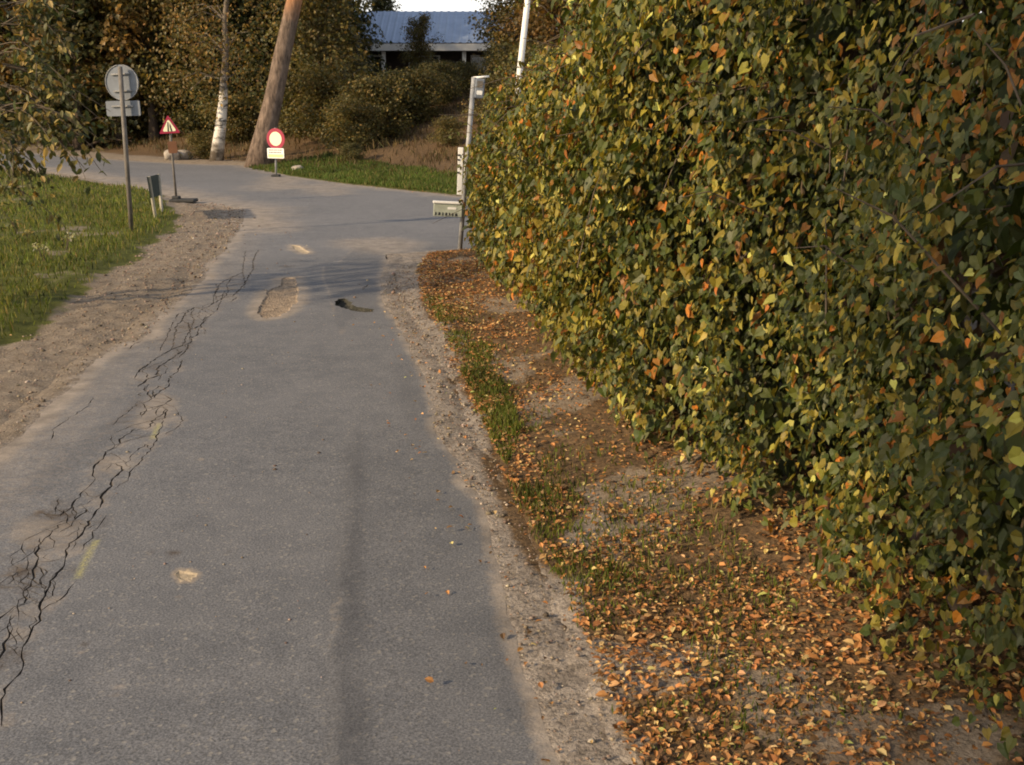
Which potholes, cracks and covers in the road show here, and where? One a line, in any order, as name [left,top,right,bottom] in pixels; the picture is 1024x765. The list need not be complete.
pothole [174,569,198,582]
crack [0,251,258,726]
pothole [334,298,374,312]
pothole [257,277,299,319]
